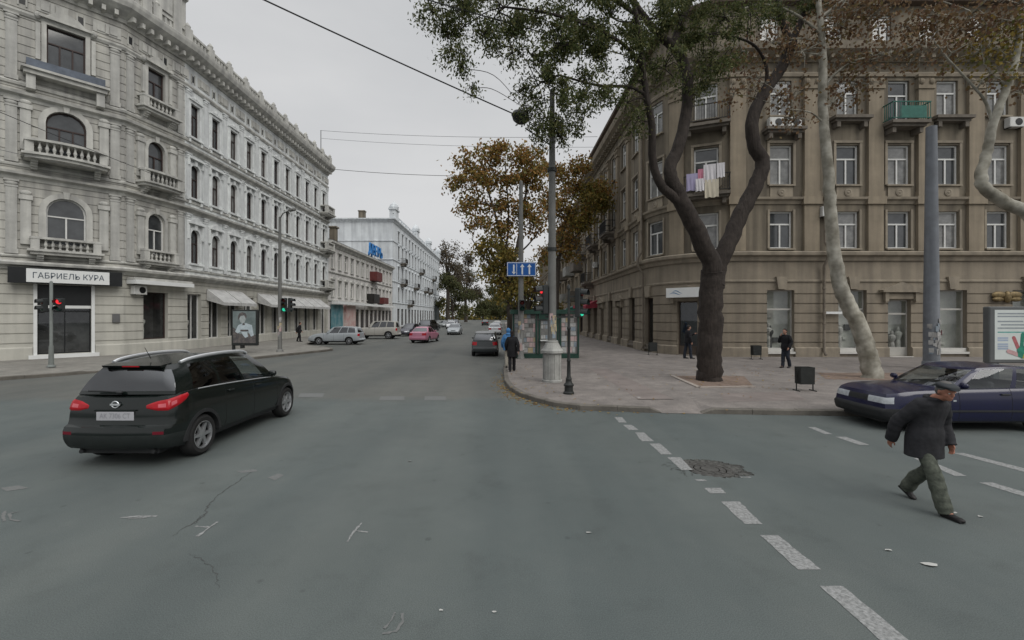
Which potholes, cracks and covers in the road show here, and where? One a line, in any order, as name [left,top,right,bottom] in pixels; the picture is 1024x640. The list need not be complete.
manhole cover [687,462,735,478]
crack [177,472,251,533]
